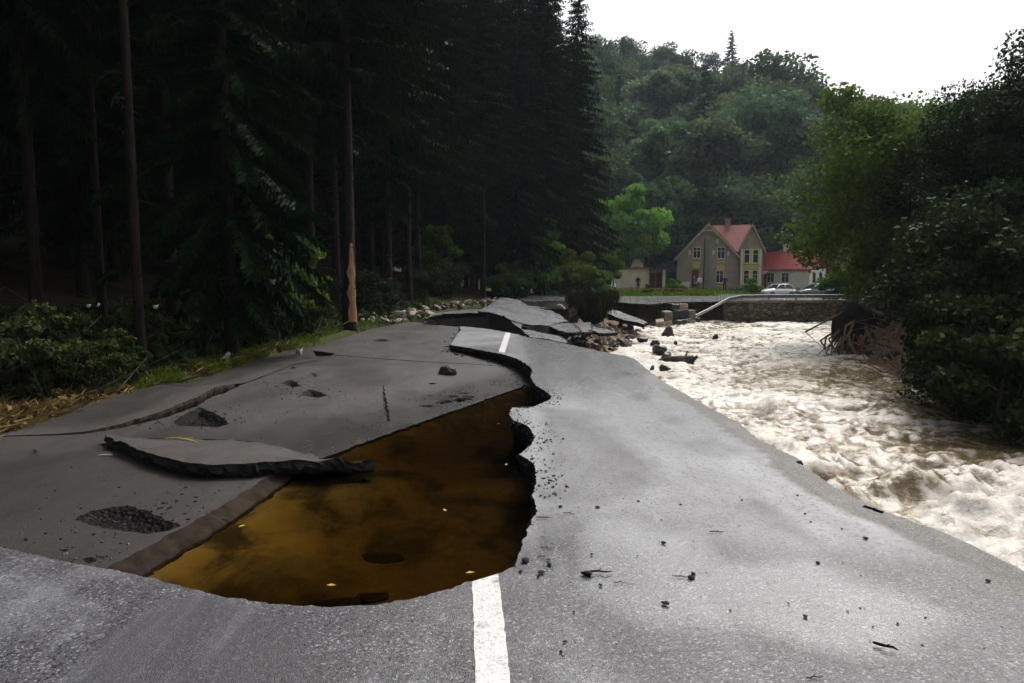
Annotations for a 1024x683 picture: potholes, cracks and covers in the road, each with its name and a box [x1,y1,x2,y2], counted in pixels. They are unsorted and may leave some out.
crack [313,301,593,403]
crack [382,385,390,421]
crack [2,370,279,442]
pothole [106,384,551,607]
